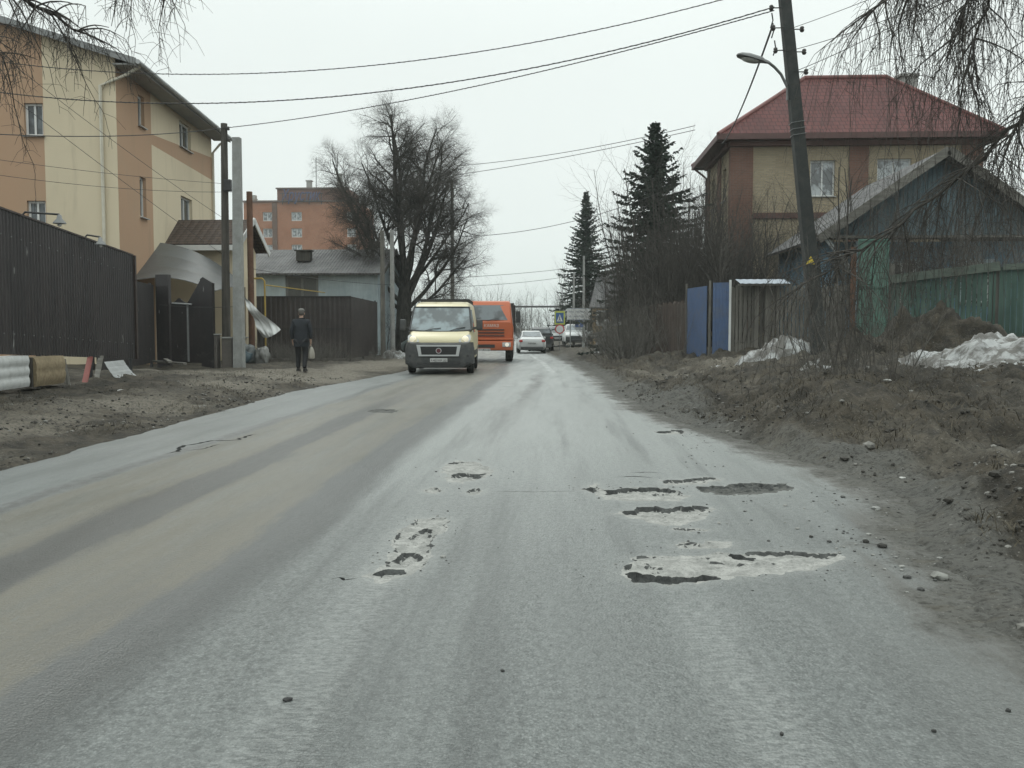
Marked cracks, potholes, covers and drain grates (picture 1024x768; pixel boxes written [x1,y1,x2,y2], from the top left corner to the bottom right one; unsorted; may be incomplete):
pothole [658,477,722,486]
crack [171,434,255,453]
pothole [581,483,690,501]
pothole [620,551,846,586]
pothole [361,517,450,584]
pothole [441,461,495,484]
pothole [615,506,716,526]
